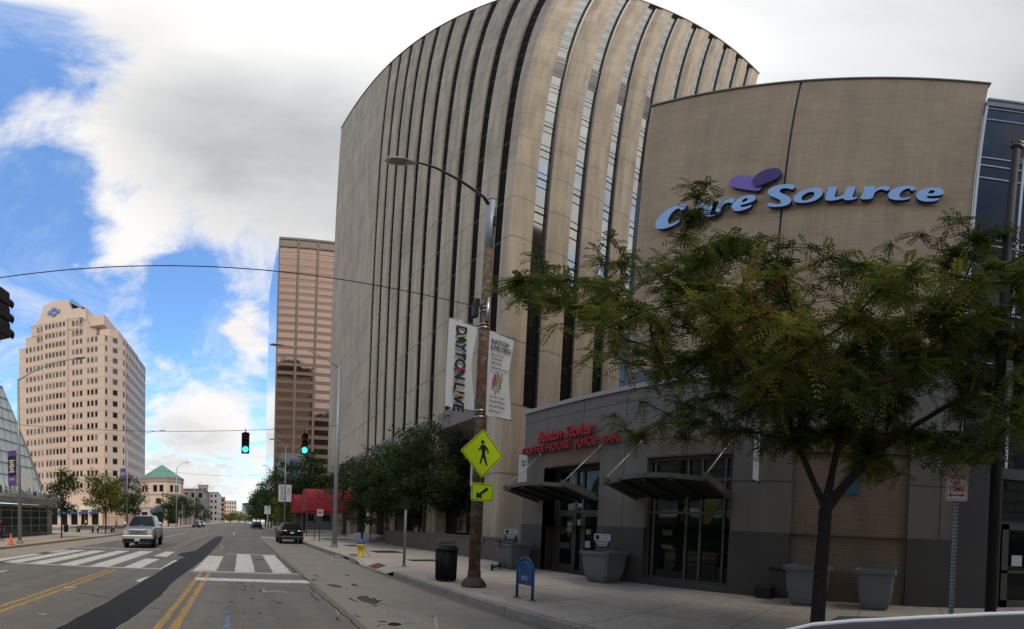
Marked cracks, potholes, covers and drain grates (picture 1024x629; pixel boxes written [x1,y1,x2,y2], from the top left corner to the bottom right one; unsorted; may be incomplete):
crack [264,543,360,629]
